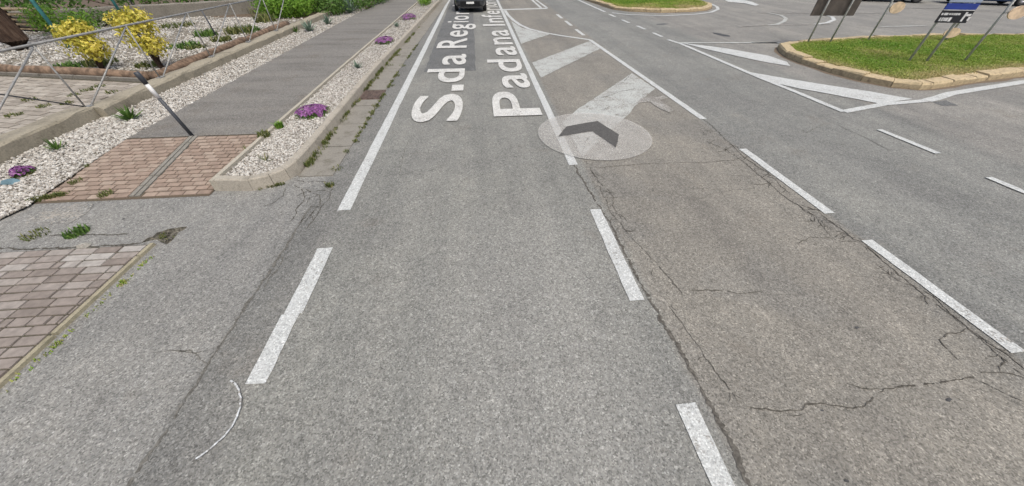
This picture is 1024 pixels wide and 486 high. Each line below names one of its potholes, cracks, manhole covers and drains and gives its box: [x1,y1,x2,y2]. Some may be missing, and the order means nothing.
crack [265,180,332,229]
crack [600,119,1024,417]
pothole [142,227,186,245]
